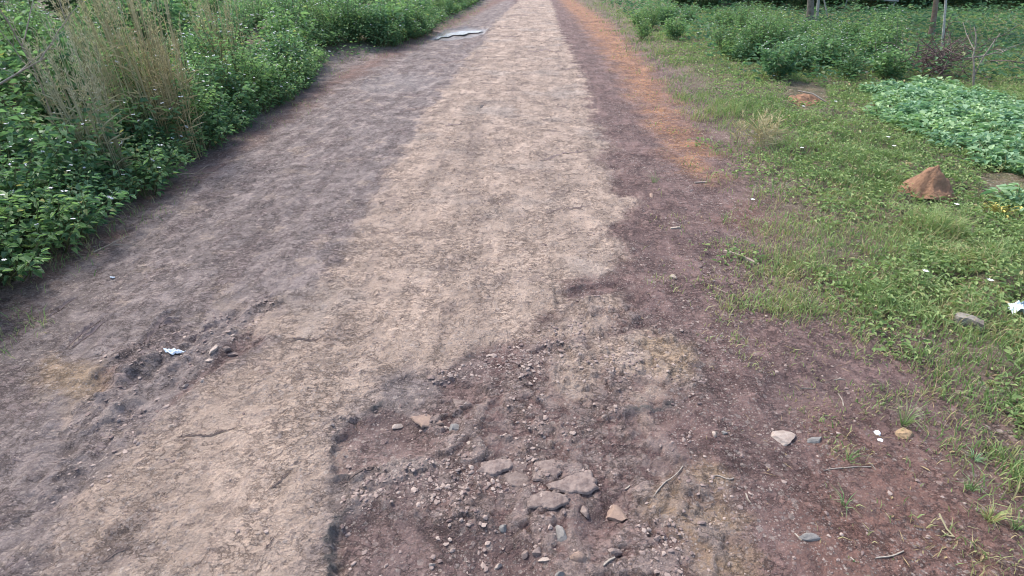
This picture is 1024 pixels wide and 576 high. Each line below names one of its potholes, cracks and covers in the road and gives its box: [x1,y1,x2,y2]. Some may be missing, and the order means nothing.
pothole [109,350,195,408]
pothole [325,496,565,576]
pothole [324,404,451,475]
pothole [434,377,491,406]
pothole [159,323,267,414]
pothole [571,477,640,558]
pothole [86,365,119,398]
crack [178,426,241,437]
